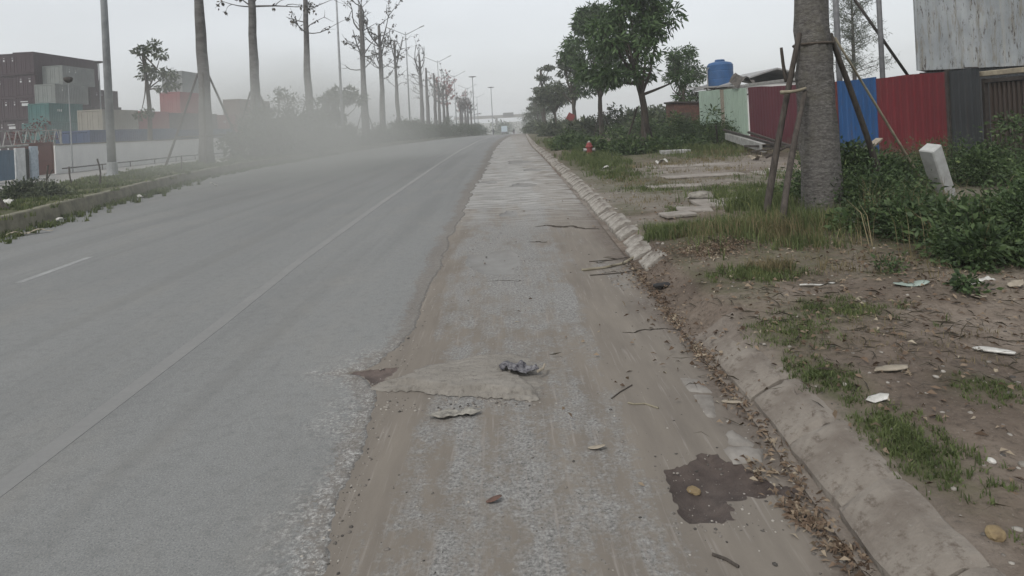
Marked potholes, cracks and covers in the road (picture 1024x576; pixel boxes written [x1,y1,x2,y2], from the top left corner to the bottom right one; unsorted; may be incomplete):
pothole [352,367,398,386]
crack [536,225,598,242]
